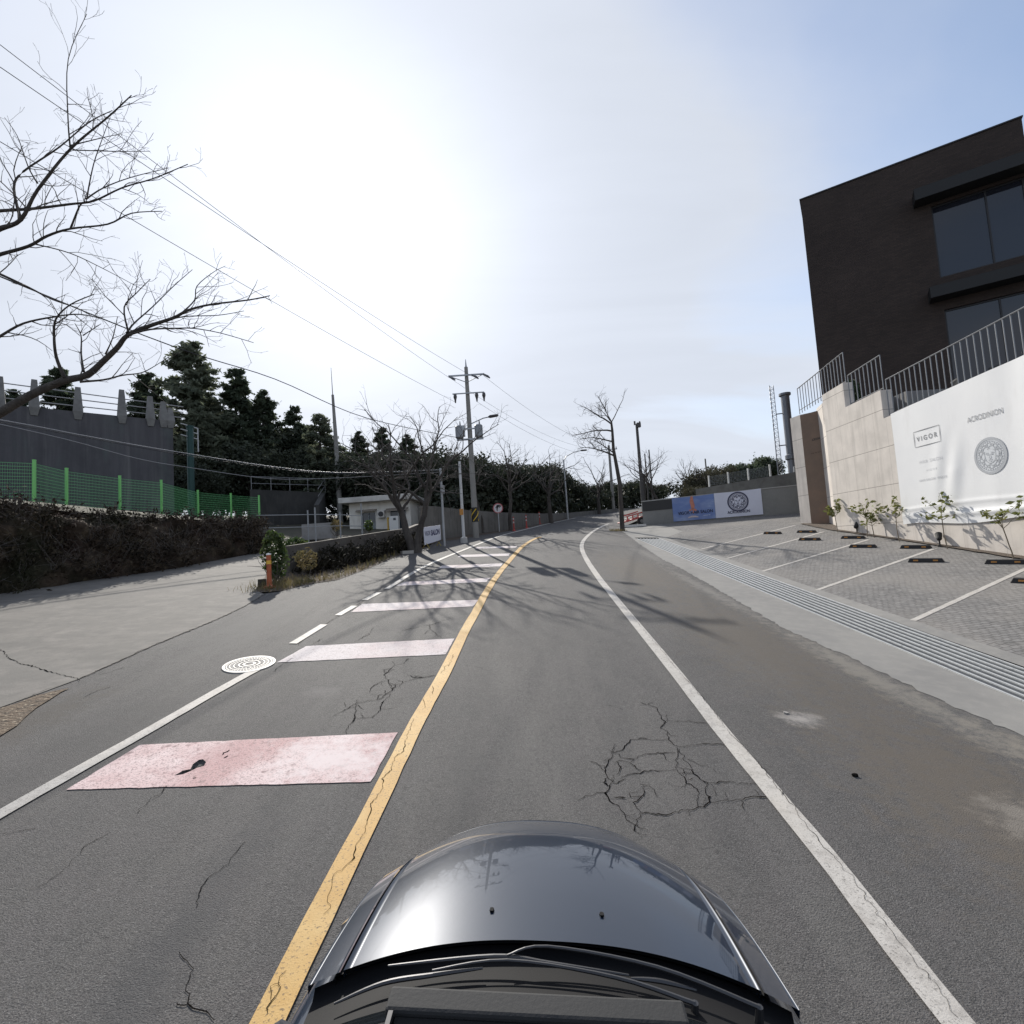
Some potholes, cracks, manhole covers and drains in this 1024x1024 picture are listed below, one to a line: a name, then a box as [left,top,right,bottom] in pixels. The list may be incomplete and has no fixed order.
crack [578,617,954,1014]
drain grate [727,576,786,584]
drain grate [764,592,837,602]
drain grate [947,669,1024,701]
drain grate [787,601,868,614]
crack [266,972,284,1013]
crack [326,655,480,912]
drain grate [892,646,1024,670]
drain grate [744,583,809,593]
drain grate [849,628,966,647]
pothole [174,759,206,776]
manhole cover [222,656,276,674]
